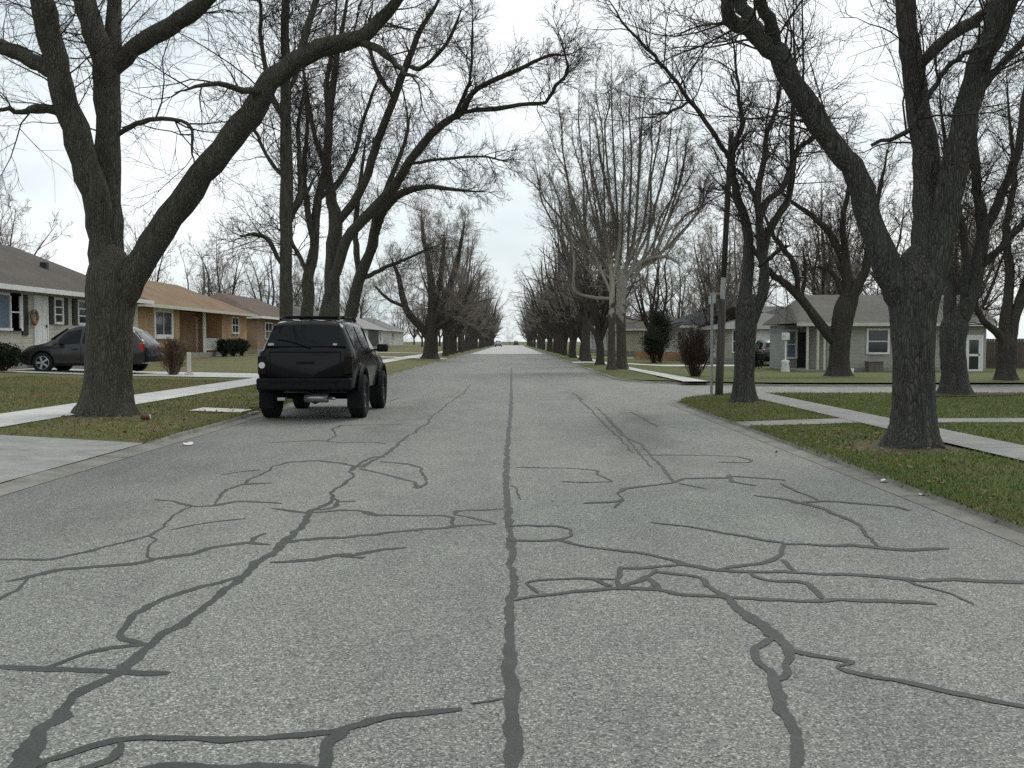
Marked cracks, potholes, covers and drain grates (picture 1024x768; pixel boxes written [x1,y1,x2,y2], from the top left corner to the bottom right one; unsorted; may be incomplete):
crack [0,384,1024,768]
